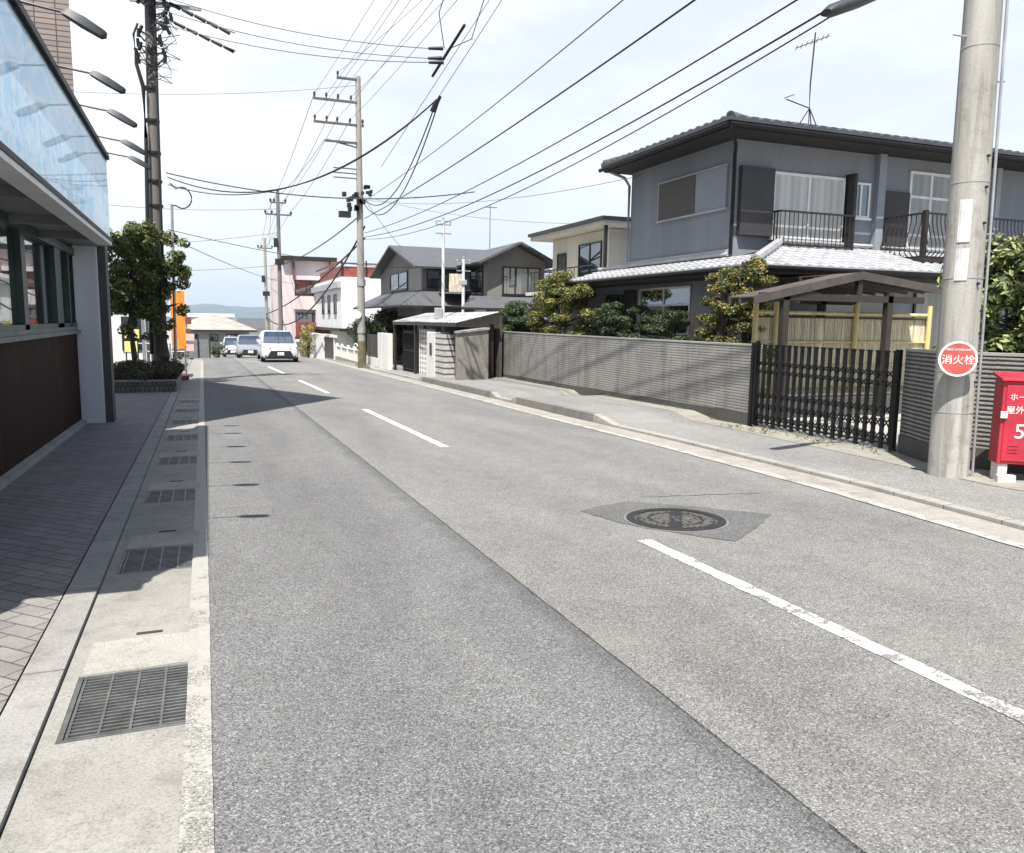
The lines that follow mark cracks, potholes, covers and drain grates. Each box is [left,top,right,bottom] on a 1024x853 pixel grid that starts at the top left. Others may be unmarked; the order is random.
manhole cover [624,508,729,532]
drain grate [116,530,200,575]
drain grate [155,451,201,466]
drain grate [141,480,200,504]
drain grate [164,431,201,441]
drain grate [55,629,198,744]
